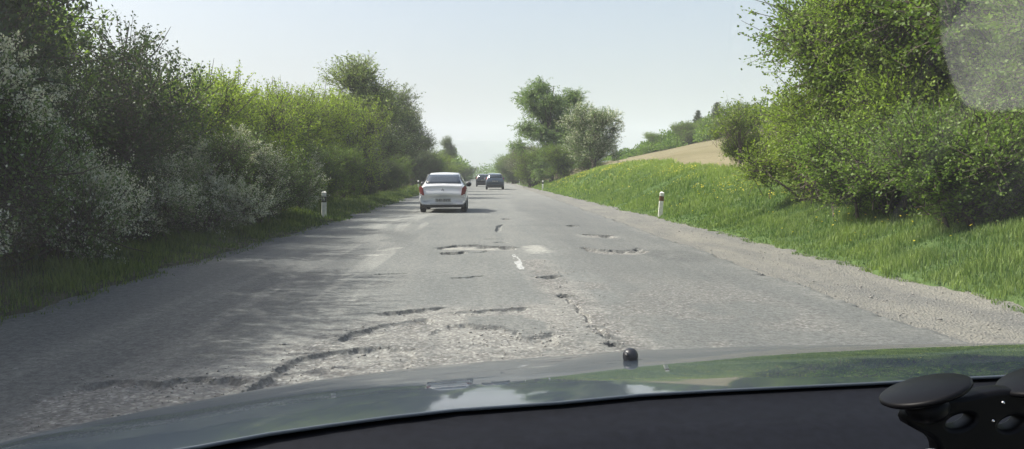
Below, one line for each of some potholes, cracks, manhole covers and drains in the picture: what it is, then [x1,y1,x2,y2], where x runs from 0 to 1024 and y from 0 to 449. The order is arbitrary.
pothole [377,307,446,317]
crack [566,299,609,338]
pothole [582,247,650,255]
pothole [453,307,529,317]
pothole [337,319,436,342]
pothole [241,346,417,392]
